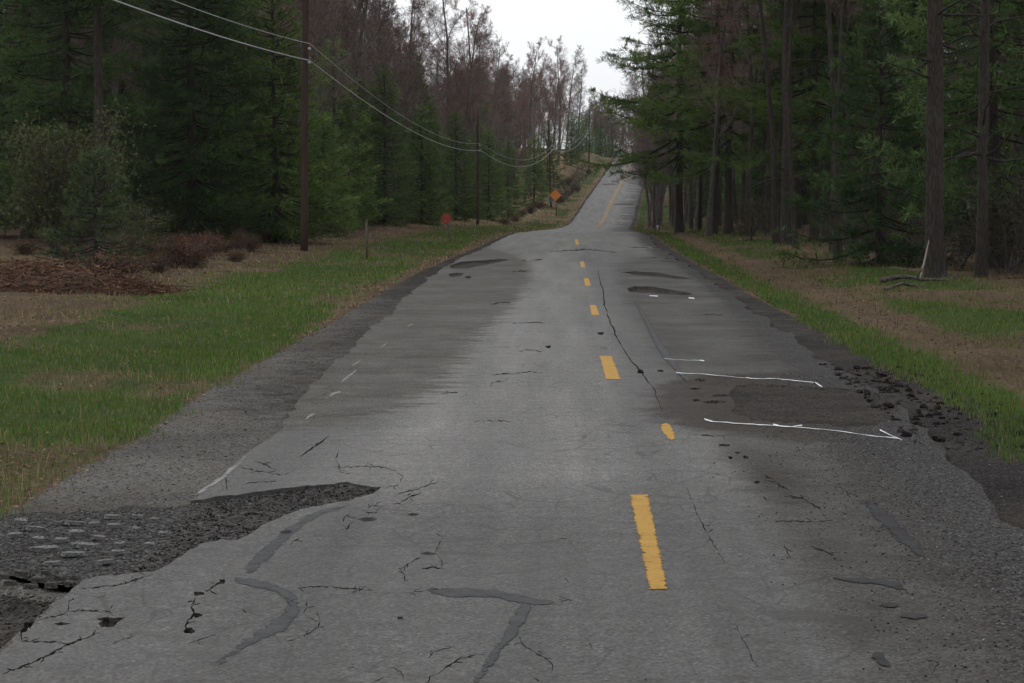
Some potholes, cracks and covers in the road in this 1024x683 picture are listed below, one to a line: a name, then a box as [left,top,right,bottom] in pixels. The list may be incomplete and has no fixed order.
pothole [449,259,509,269]
pothole [0,484,379,585]
pothole [623,271,693,280]
crack [398,534,446,595]
pothole [627,286,693,295]
crack [286,585,377,642]
crack [184,578,228,645]
crack [3,573,153,674]
crack [226,436,438,532]
